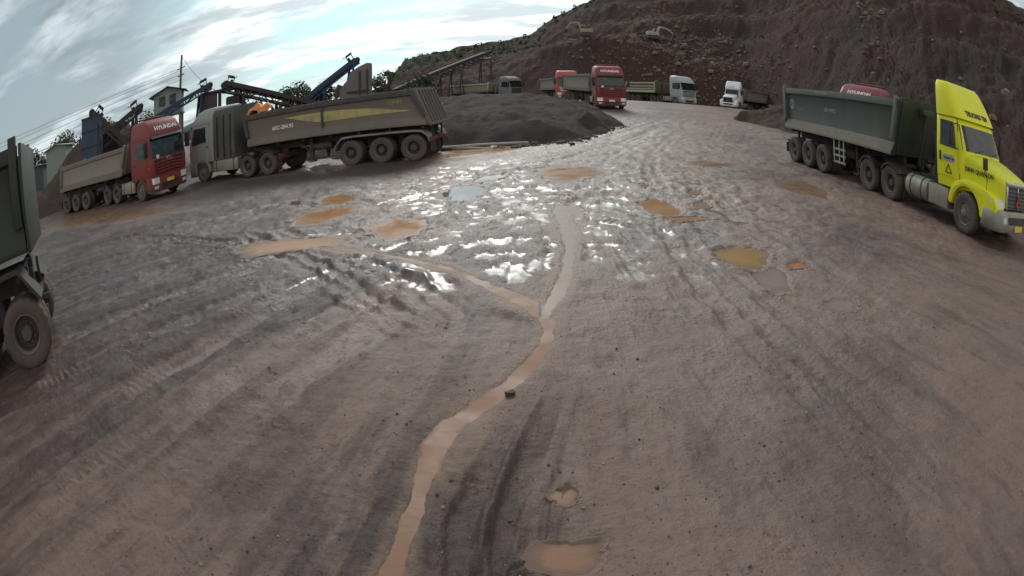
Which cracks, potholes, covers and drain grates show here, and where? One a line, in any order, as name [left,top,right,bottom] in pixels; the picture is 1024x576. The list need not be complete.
pothole [284,202,370,232]
pothole [227,233,364,260]
pothole [680,159,741,168]
pothole [631,195,688,218]
pothole [526,163,614,186]
pothole [767,177,841,204]
pothole [705,243,779,274]
pothole [544,483,583,510]
pothole [512,535,611,576]
pothole [785,260,810,271]
pothole [358,212,439,243]
pothole [435,182,491,203]
